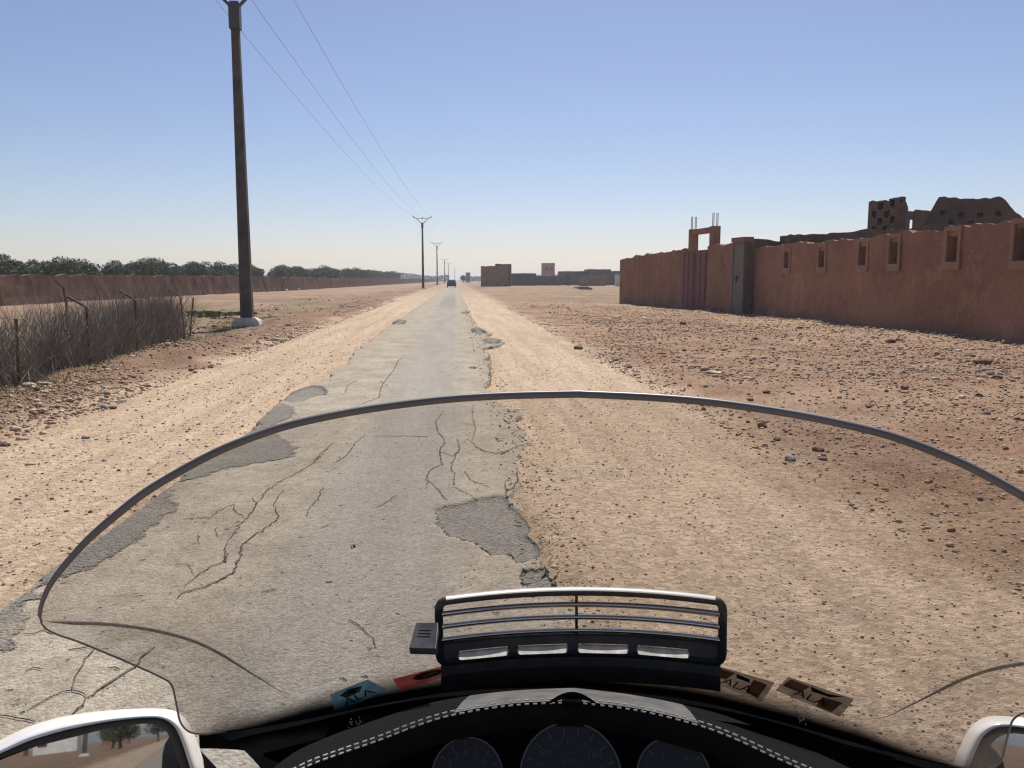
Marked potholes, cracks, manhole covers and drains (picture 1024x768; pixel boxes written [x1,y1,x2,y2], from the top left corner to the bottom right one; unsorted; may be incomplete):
crack [0,647,155,722]
pothole [435,496,542,563]
pothole [519,566,558,588]
pothole [283,385,328,403]
crack [420,404,533,501]
crack [175,445,331,598]
